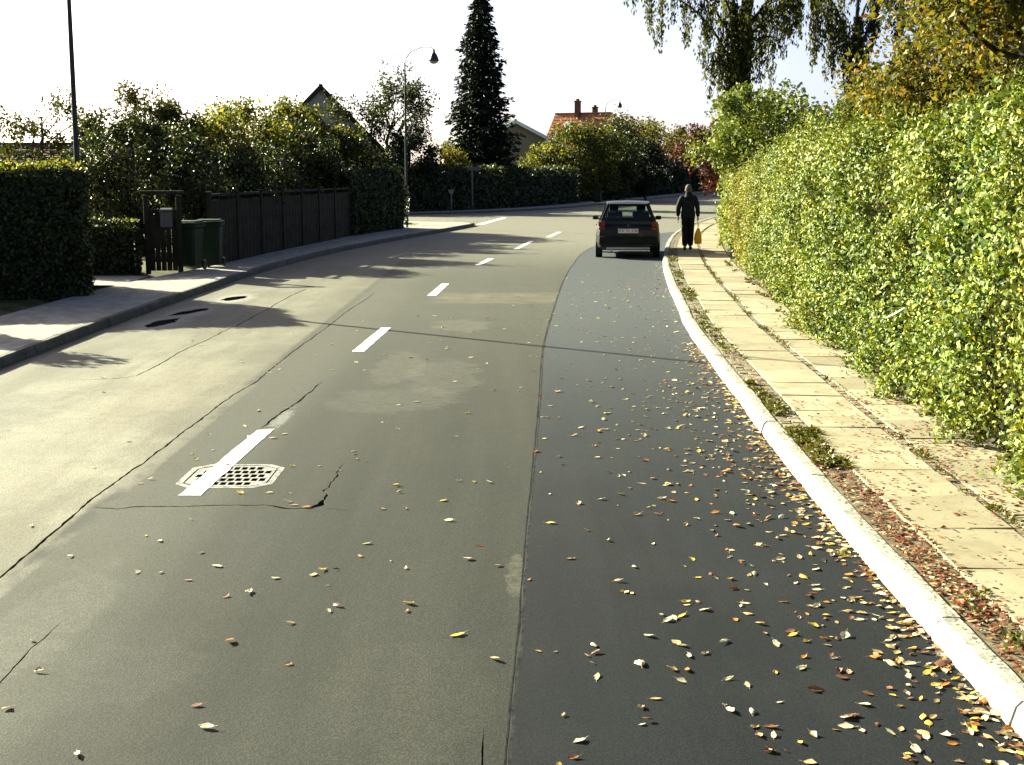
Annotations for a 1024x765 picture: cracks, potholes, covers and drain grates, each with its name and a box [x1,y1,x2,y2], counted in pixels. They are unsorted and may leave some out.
crack [0,624,59,683]
crack [0,294,373,578]
pothole [145,318,179,328]
